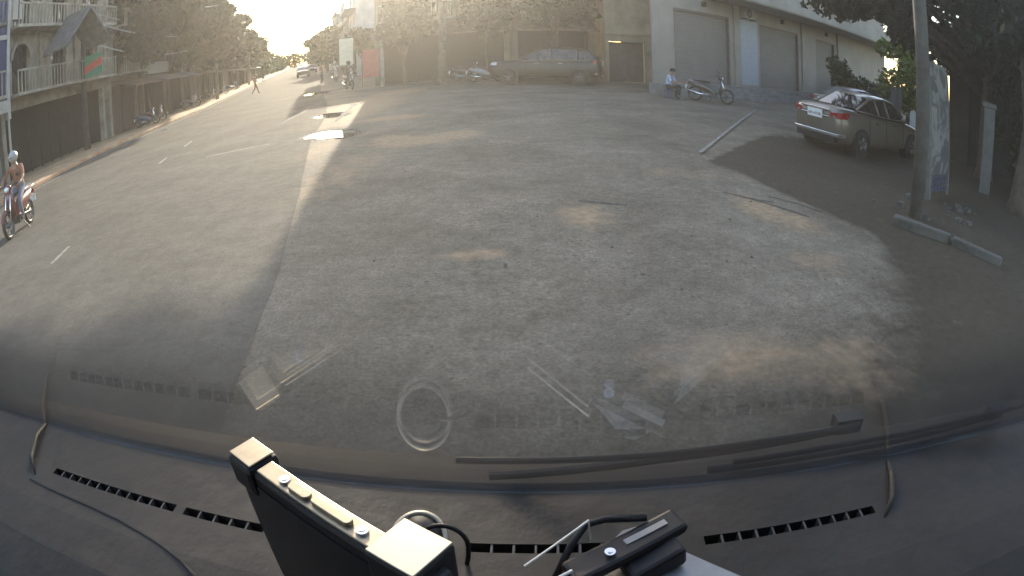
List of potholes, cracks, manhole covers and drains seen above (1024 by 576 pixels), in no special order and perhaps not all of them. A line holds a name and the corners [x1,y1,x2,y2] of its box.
crack [724,192,823,217]
